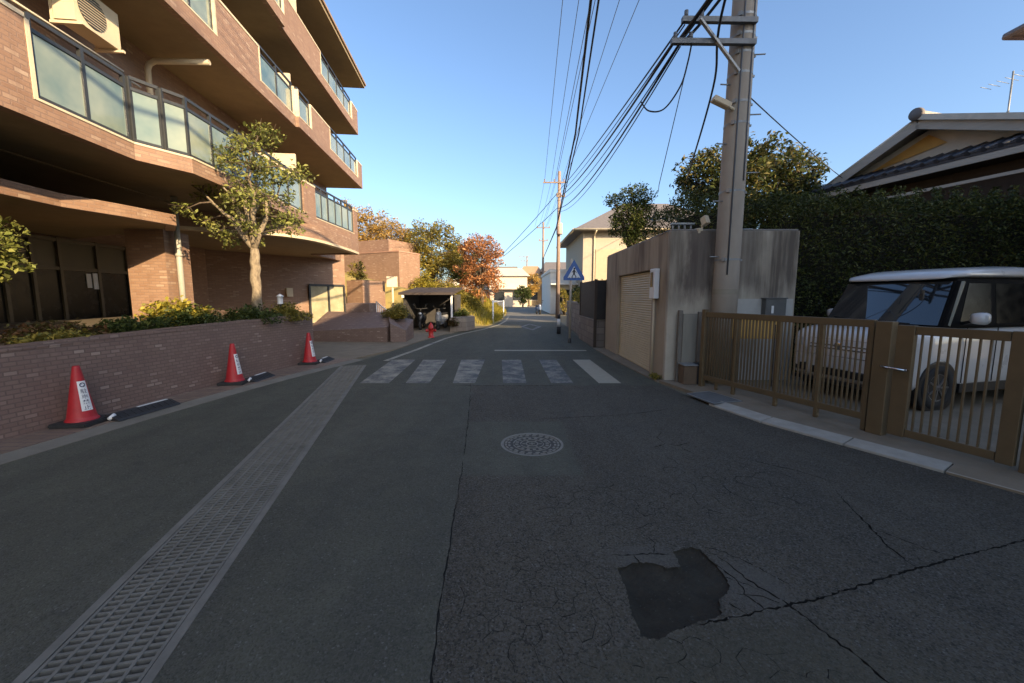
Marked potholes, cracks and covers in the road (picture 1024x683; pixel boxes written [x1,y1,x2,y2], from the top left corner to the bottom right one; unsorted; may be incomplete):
crack [613,490,1024,683]
utility cover [686,391,743,405]
drain grate [12,365,366,683]
manhole cover [501,433,563,456]
